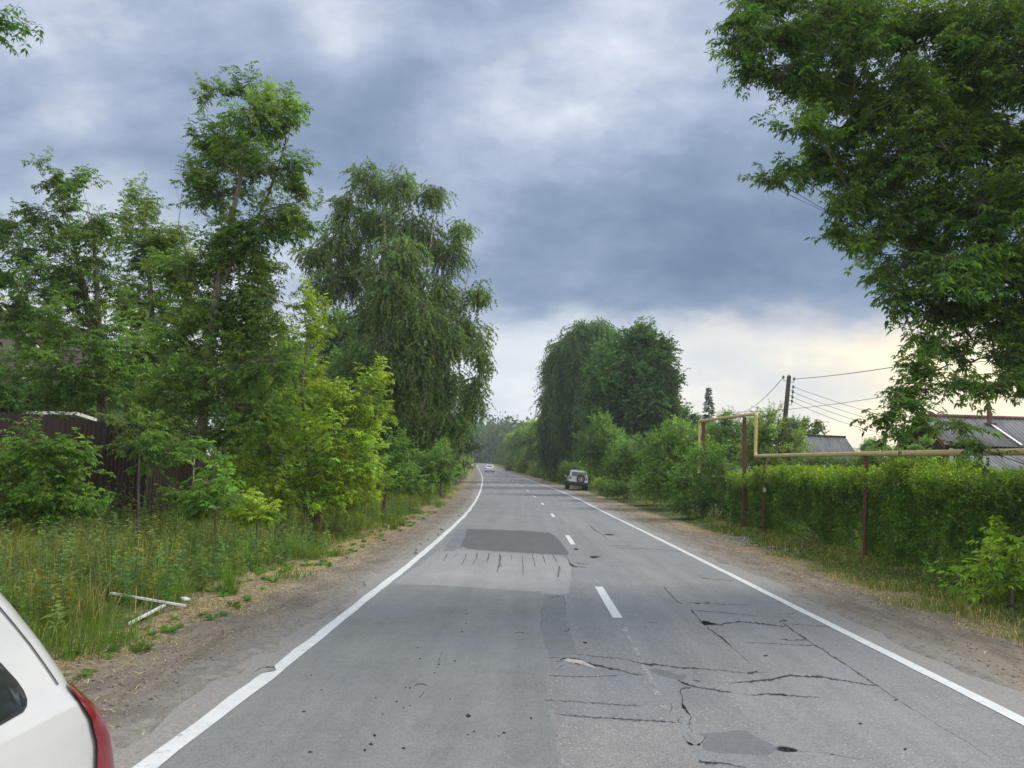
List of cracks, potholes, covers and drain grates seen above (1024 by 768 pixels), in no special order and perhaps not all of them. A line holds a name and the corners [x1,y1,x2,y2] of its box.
crack [445,553,587,575]
crack [549,602,989,757]
